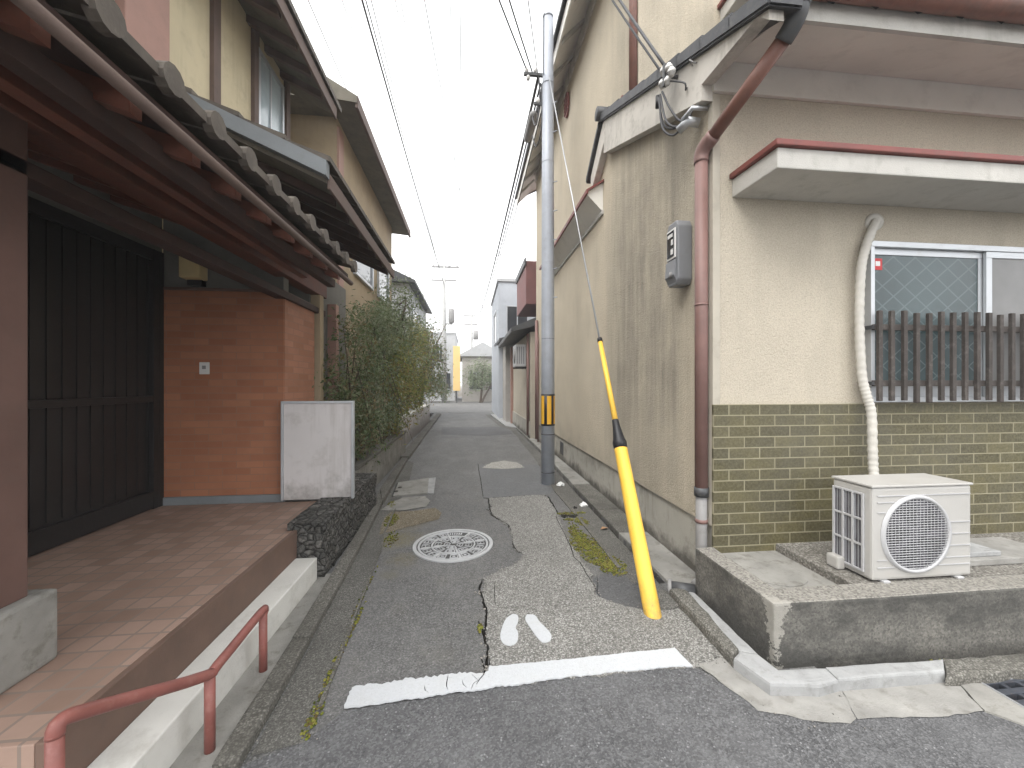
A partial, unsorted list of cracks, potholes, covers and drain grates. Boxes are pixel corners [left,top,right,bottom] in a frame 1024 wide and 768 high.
manhole cover [412,529,493,563]
drain grate [982,679,1024,708]
crack [474,579,495,674]
